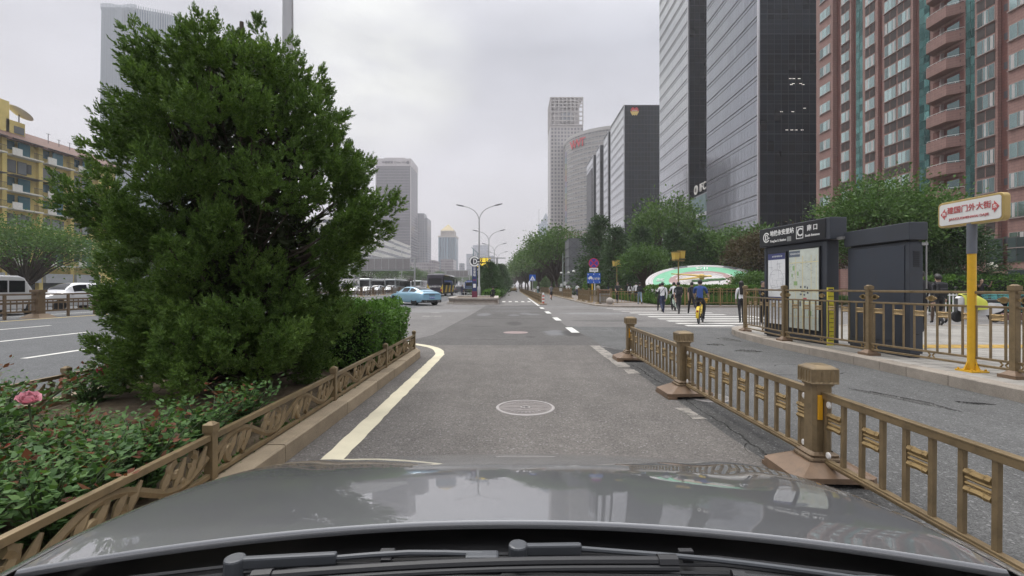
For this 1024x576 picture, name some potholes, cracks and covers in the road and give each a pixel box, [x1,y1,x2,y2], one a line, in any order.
manhole cover [496,400,555,416]
